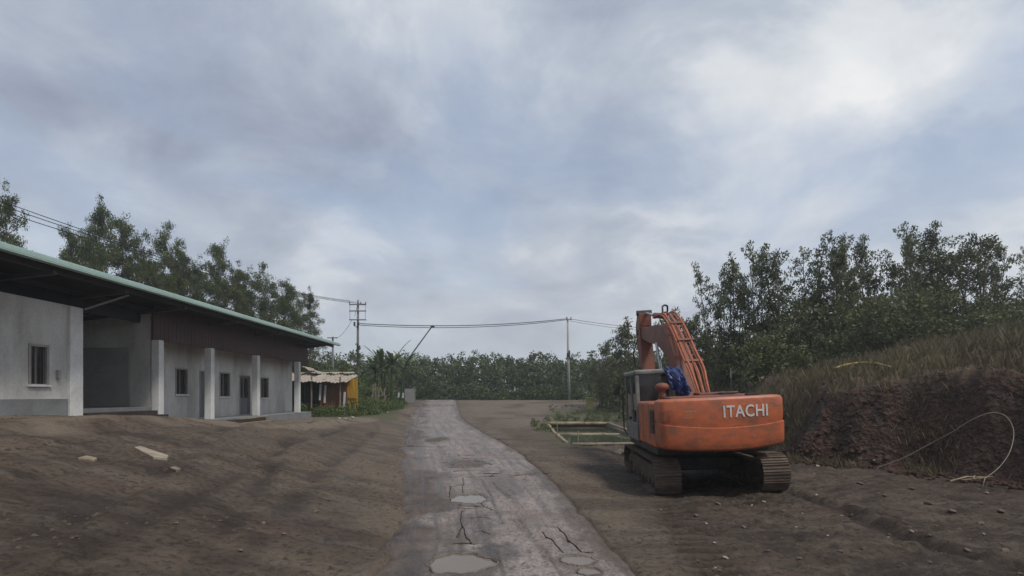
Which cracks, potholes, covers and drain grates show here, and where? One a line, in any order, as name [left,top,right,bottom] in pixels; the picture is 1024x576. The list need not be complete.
pothole [559,555,597,566]
crack [542,525,594,553]
crack [406,445,549,545]
pothole [577,567,602,576]
pothole [426,552,499,574]
pothole [450,493,487,504]
